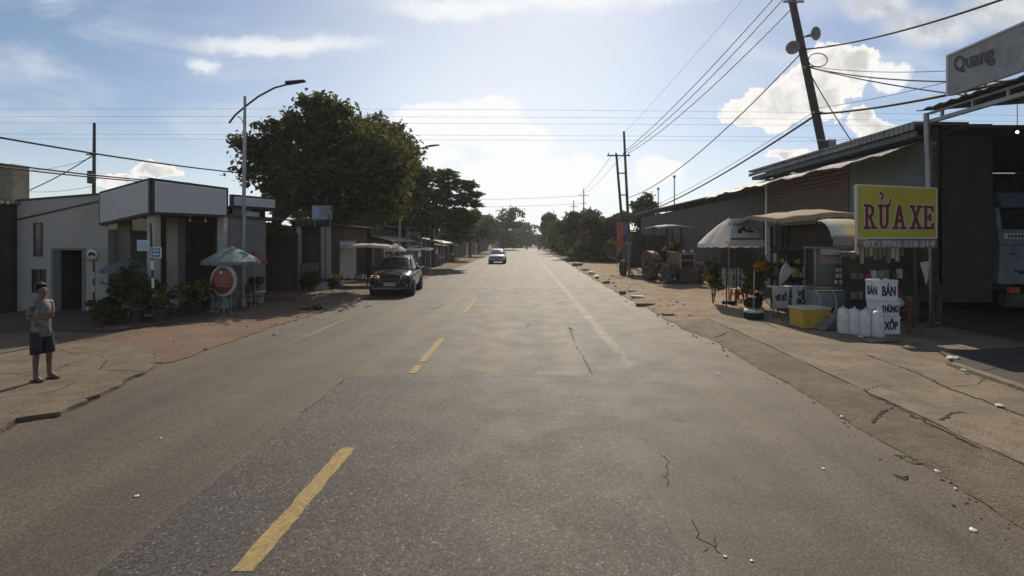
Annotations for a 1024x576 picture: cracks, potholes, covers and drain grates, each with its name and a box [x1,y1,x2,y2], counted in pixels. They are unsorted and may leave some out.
crack [776,377,1024,529]
crack [1,349,132,433]
crack [691,517,722,554]
crack [864,354,1024,449]
